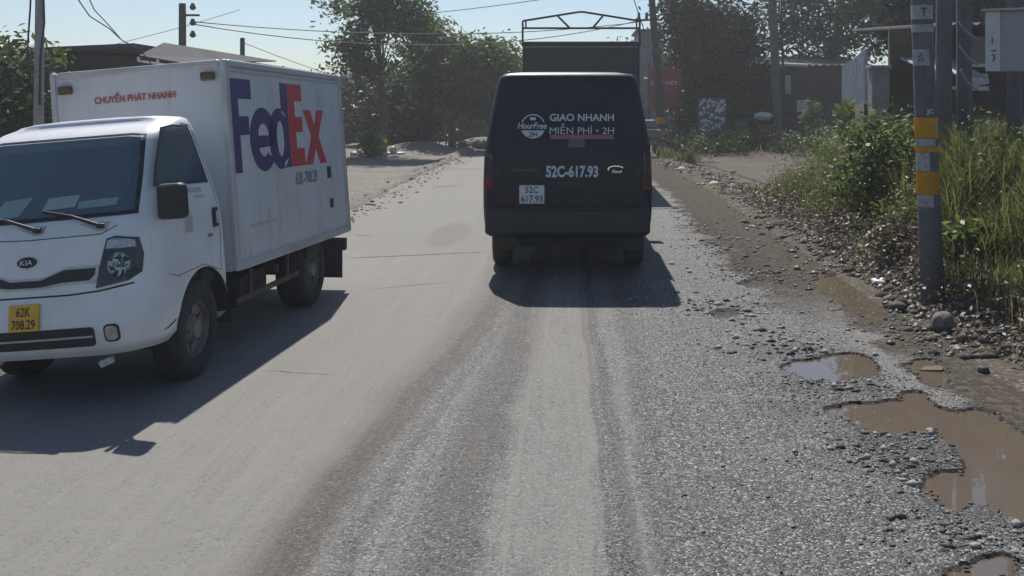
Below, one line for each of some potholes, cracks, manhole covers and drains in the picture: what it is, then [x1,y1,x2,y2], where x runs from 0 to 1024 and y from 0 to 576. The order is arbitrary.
pothole [925,549,1024,576]
pothole [775,351,886,382]
pothole [899,356,957,391]
pothole [816,388,1024,521]
